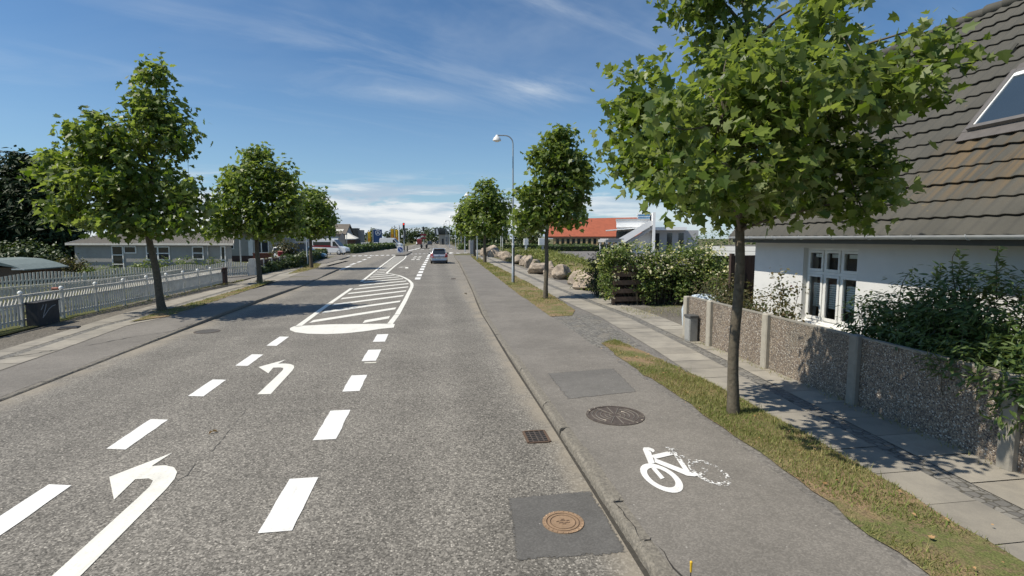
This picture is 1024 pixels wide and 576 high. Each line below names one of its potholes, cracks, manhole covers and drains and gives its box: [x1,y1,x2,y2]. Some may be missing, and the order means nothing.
manhole cover [542,510,584,534]
manhole cover [586,406,645,426]
drain grate [522,430,551,444]
crack [612,498,683,576]
